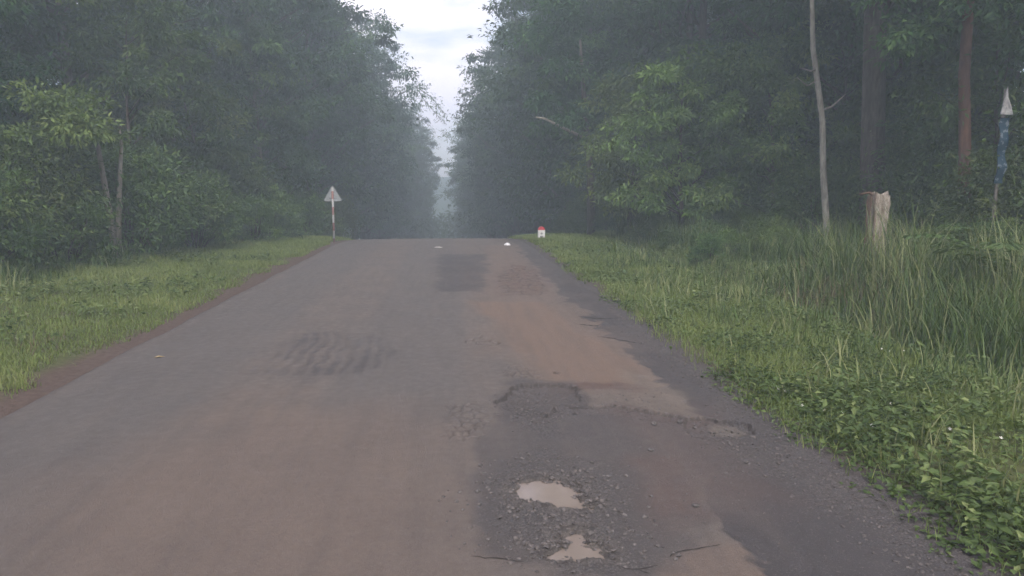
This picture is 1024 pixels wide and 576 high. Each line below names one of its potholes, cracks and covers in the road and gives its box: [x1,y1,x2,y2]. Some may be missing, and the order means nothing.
crack [622,544,720,574]
pothole [485,381,587,420]
crack [438,399,498,443]
pothole [678,415,763,443]
pothole [498,472,612,516]
pothole [529,520,627,570]
